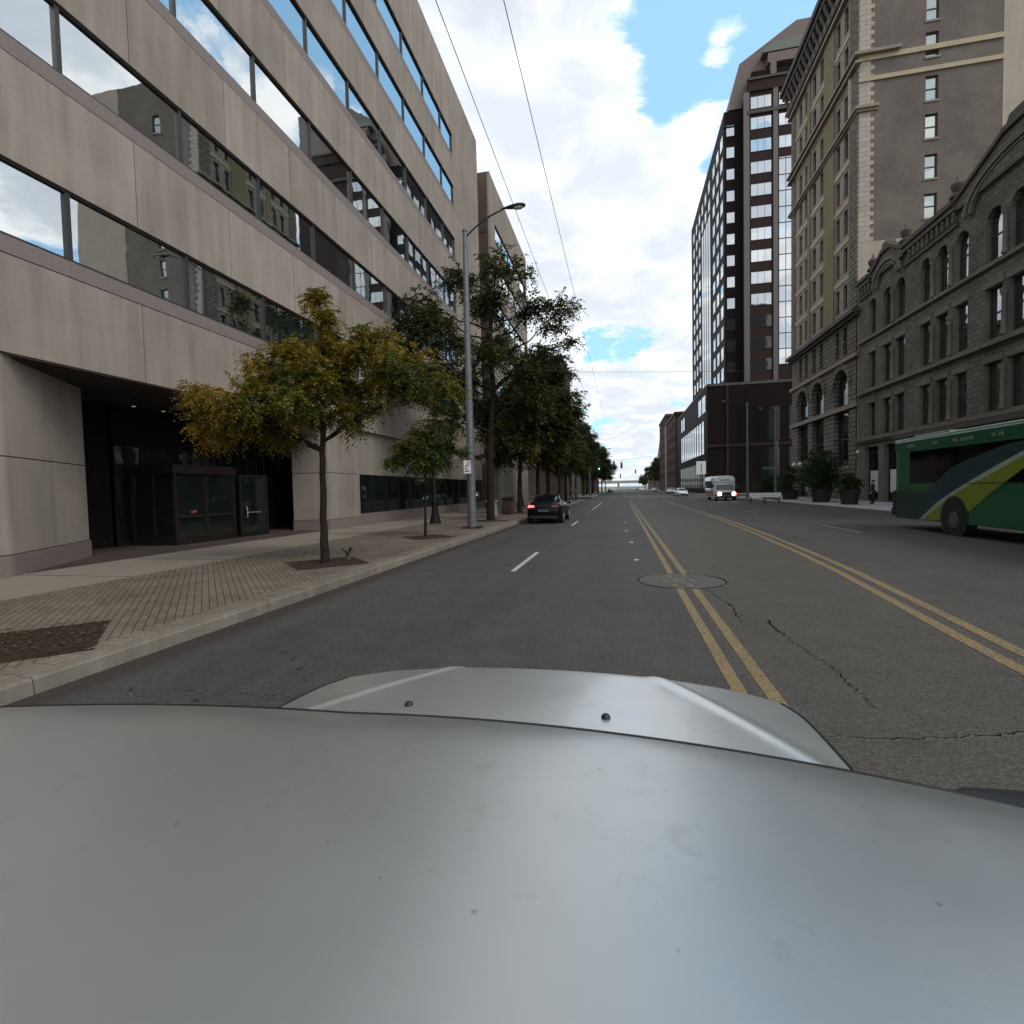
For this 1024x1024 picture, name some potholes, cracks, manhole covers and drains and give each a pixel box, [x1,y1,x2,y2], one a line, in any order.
crack [824,731,1024,742]
crack [766,619,876,707]
crack [703,588,747,622]
manhole cover [638,573,727,589]
